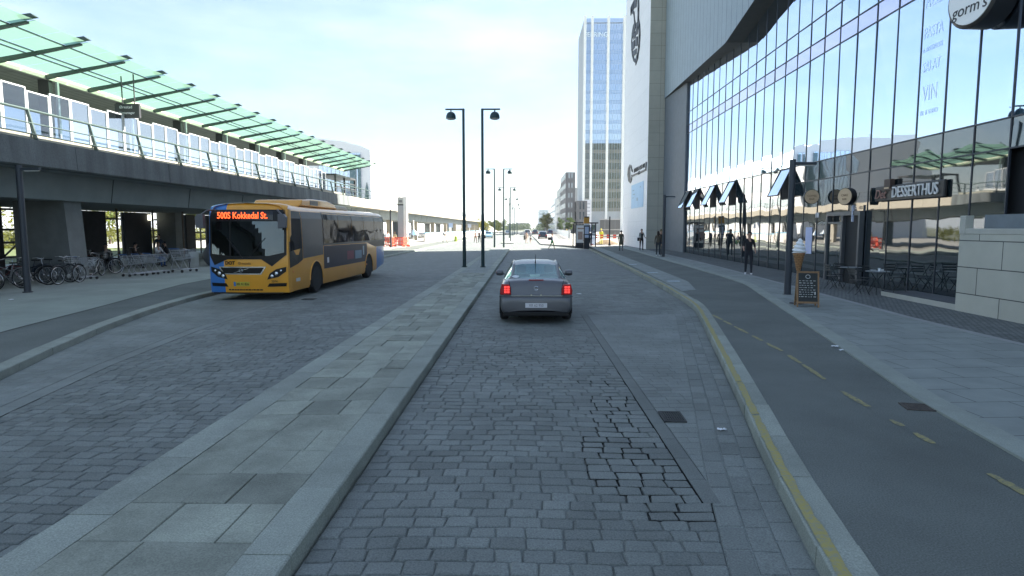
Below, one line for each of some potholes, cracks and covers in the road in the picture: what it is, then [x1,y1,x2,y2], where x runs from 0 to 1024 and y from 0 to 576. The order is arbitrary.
drain grate [658,411,687,426]
